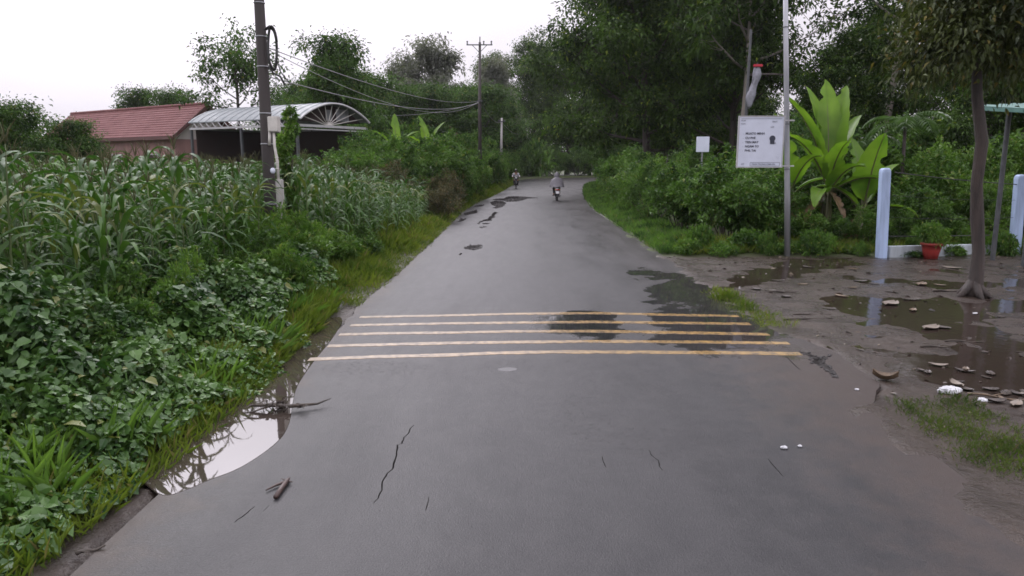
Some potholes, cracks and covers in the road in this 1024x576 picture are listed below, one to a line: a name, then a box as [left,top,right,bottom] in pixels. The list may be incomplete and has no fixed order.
crack [373,425,414,504]
